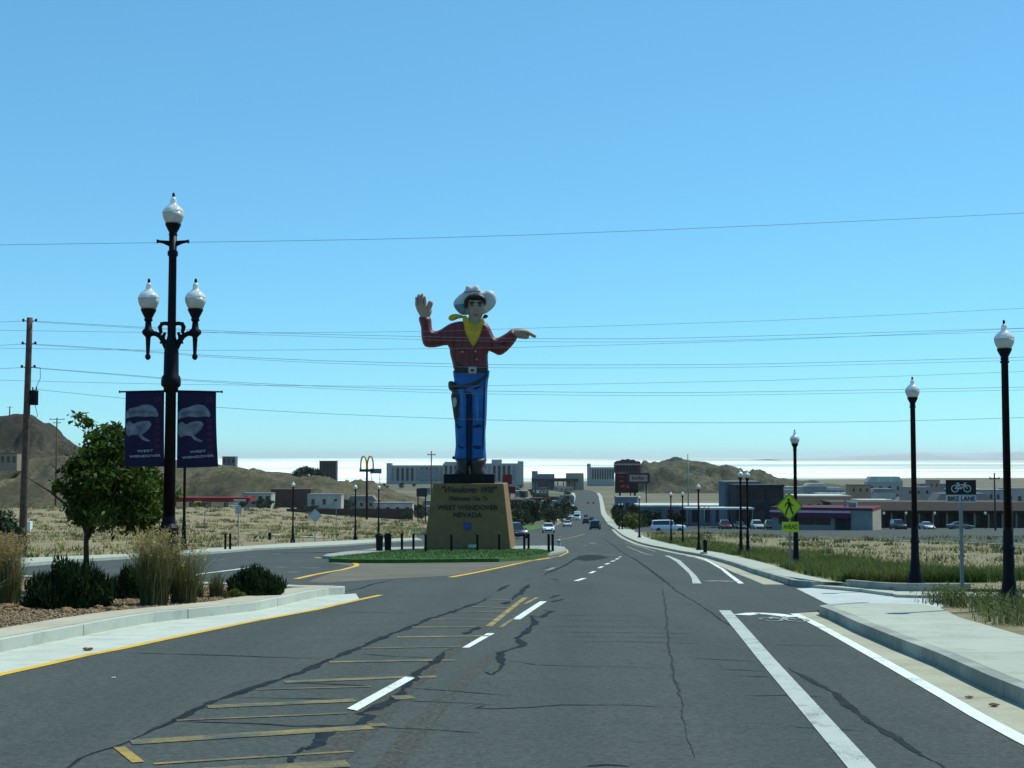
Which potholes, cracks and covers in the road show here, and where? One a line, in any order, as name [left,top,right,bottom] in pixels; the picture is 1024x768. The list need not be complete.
crack [749,668,945,768]
crack [400,588,768,757]
